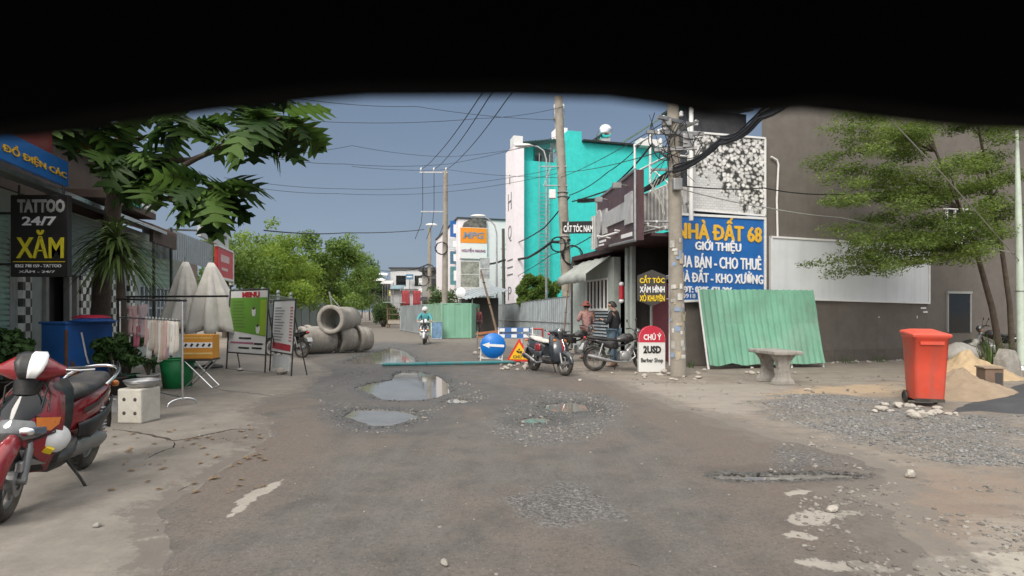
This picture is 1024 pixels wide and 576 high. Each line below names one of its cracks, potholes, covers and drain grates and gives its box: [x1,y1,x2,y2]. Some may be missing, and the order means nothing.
crack [113,429,236,459]
pothole [544,402,589,412]
pothole [355,371,451,400]
pothole [344,348,416,364]
pothole [342,409,419,426]
